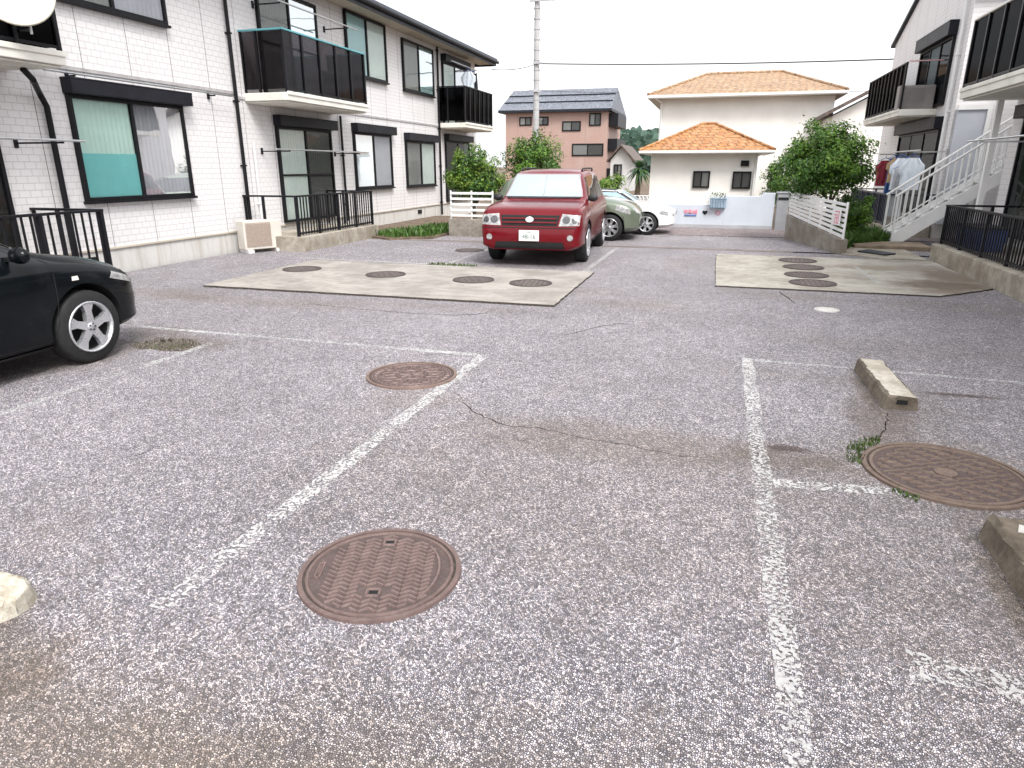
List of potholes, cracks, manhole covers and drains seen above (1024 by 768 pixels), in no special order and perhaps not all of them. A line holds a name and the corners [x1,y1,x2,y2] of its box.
manhole cover [366,362,457,390]
manhole cover [861,442,1024,511]
manhole cover [453,276,494,284]
manhole cover [509,279,552,287]
manhole cover [789,279,837,287]
manhole cover [297,528,461,624]
manhole cover [784,271,829,279]
crack [460,396,717,458]
